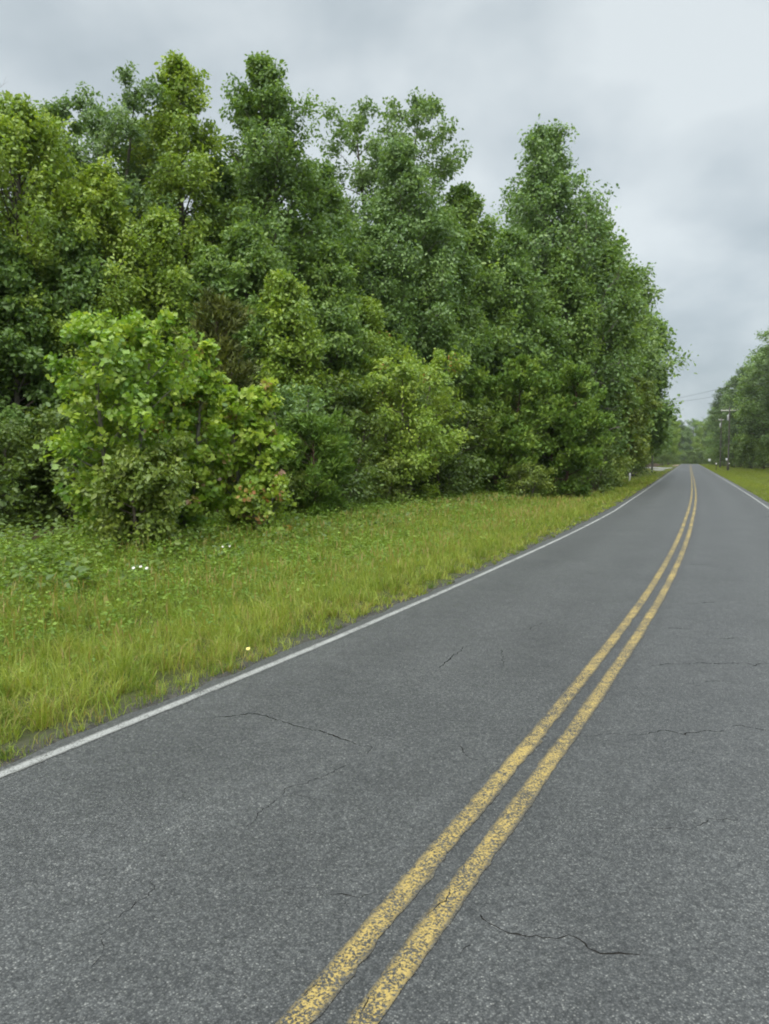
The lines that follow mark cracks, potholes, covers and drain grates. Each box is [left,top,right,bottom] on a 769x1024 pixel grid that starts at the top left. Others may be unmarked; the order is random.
crack [481,917,666,956]
crack [91,879,155,967]
crack [220,713,372,754]
crack [247,765,346,826]
